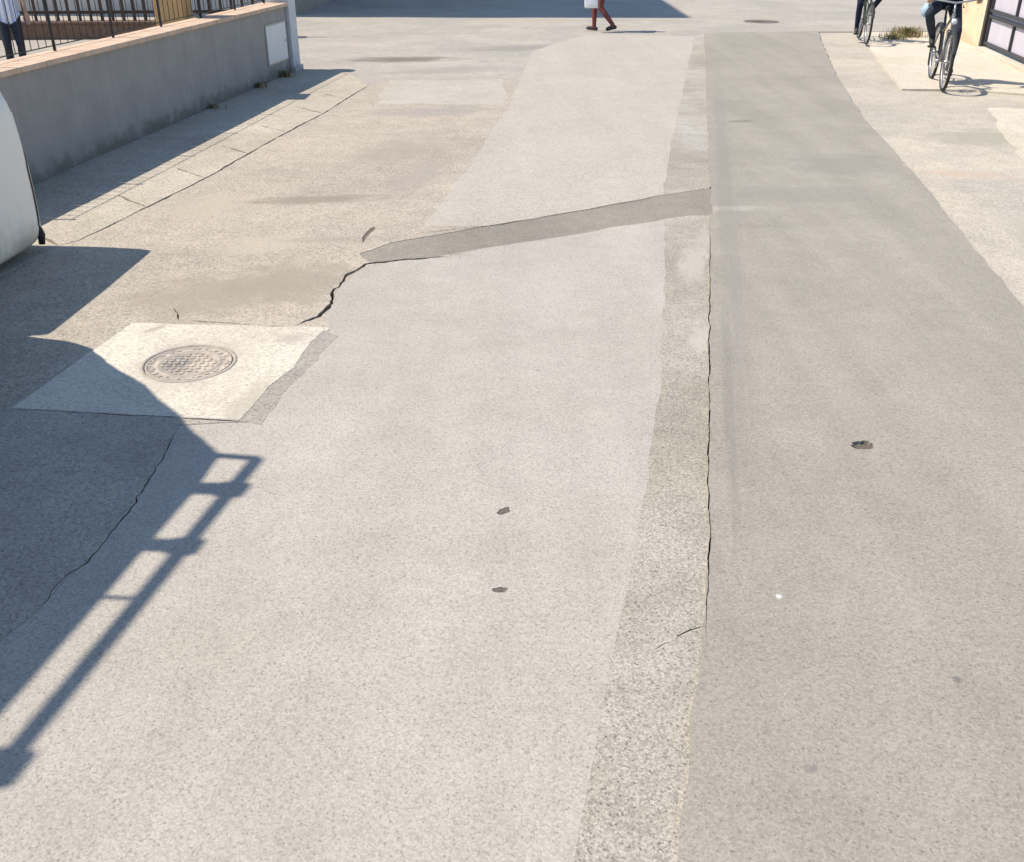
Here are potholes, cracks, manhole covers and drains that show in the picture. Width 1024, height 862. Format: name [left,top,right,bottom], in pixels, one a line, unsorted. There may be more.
crack [362,227,375,242]
crack [303,259,420,323]
manhole cover [139,344,237,383]
